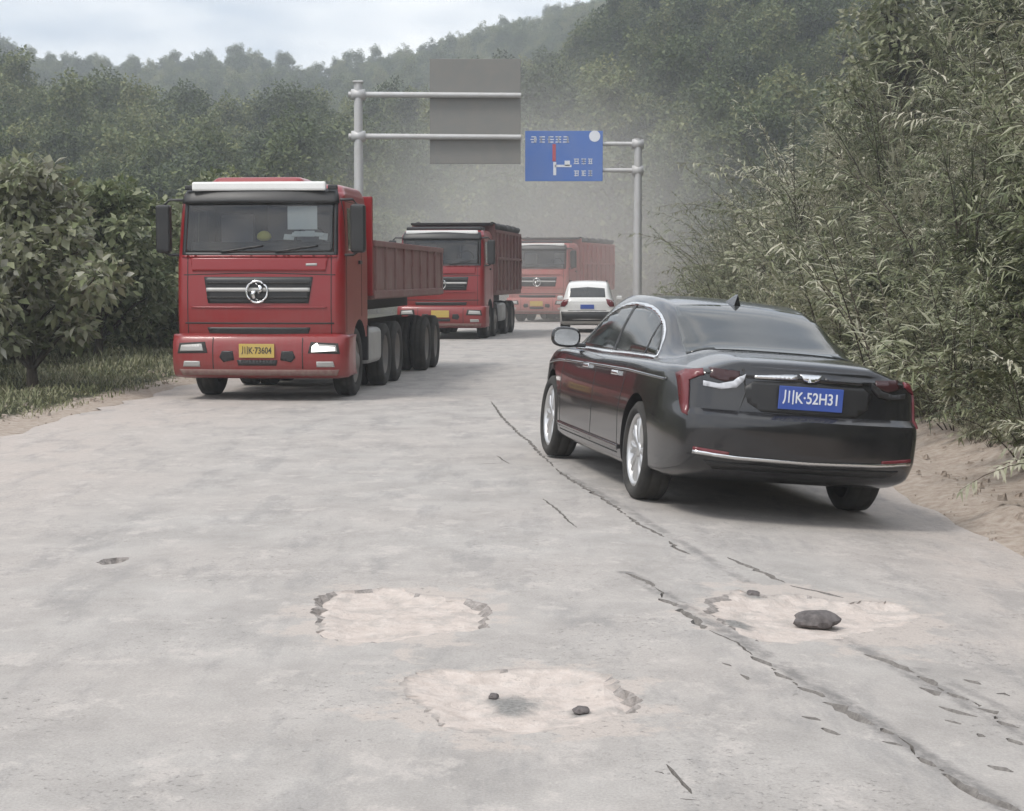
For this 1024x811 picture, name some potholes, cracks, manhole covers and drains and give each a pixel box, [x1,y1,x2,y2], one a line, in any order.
crack [727,557,844,598]
pothole [96,557,129,565]
pothole [703,589,923,644]
pothole [398,667,643,735]
crack [626,573,1023,811]
crack [488,401,689,554]
pothole [310,587,493,643]
